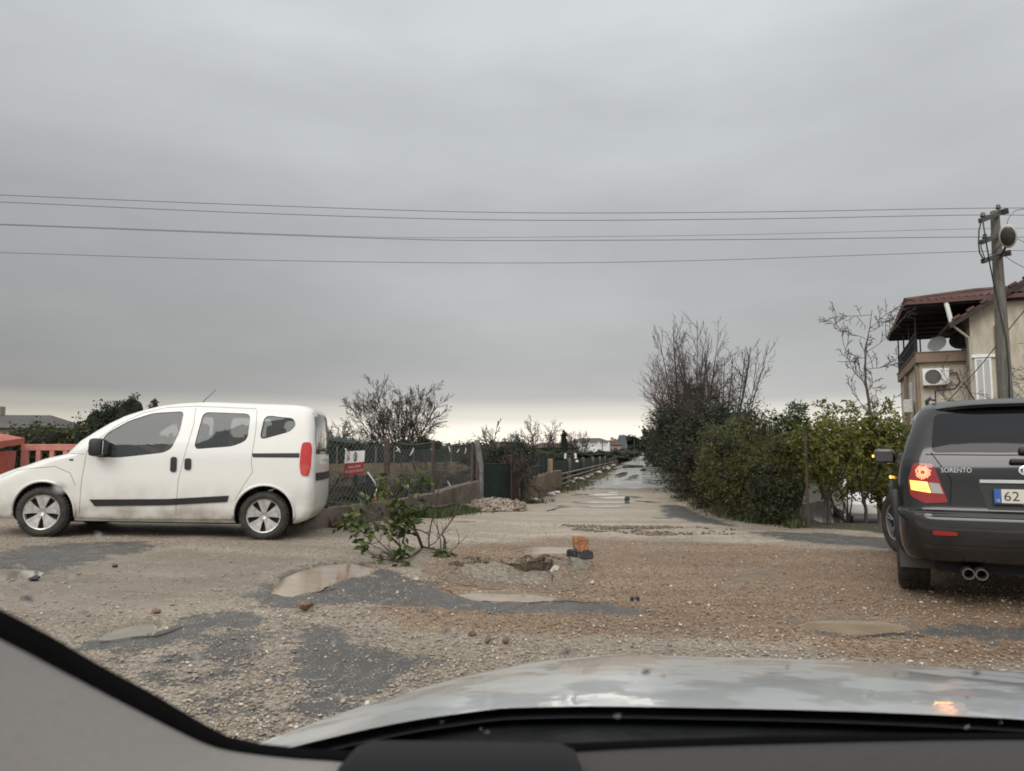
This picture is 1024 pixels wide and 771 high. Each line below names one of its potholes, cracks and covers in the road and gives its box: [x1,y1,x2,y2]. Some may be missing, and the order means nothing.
pothole [81,616,171,643]
pothole [271,560,379,597]
pothole [447,590,568,604]
pothole [782,614,926,636]
pothole [0,566,59,581]
